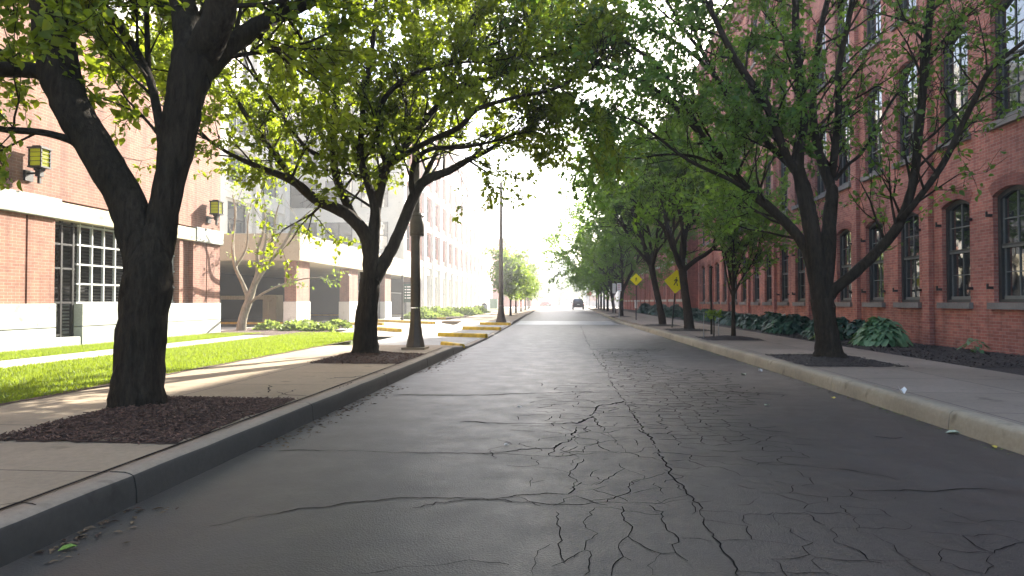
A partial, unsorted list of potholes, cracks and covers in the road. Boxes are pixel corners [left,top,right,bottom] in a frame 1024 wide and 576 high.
crack [213,348,1023,576]
